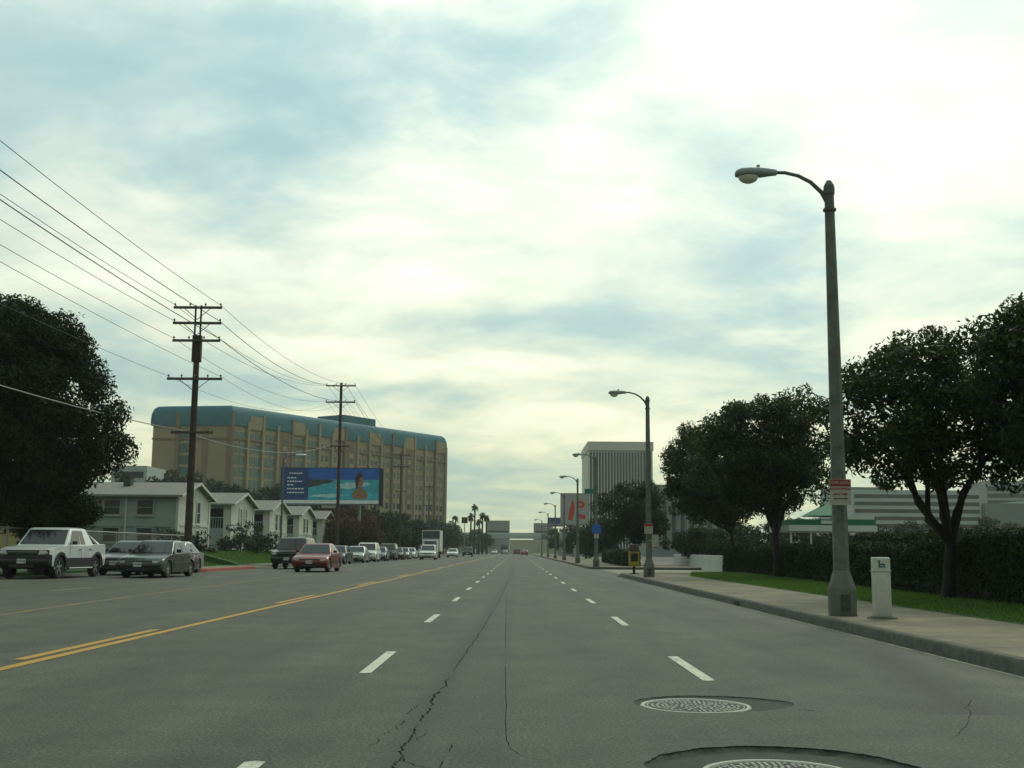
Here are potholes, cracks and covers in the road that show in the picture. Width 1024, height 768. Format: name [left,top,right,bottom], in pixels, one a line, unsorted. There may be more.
manhole cover [640,698,752,713]
crack [373,584,507,768]
manhole cover [703,759,841,768]
